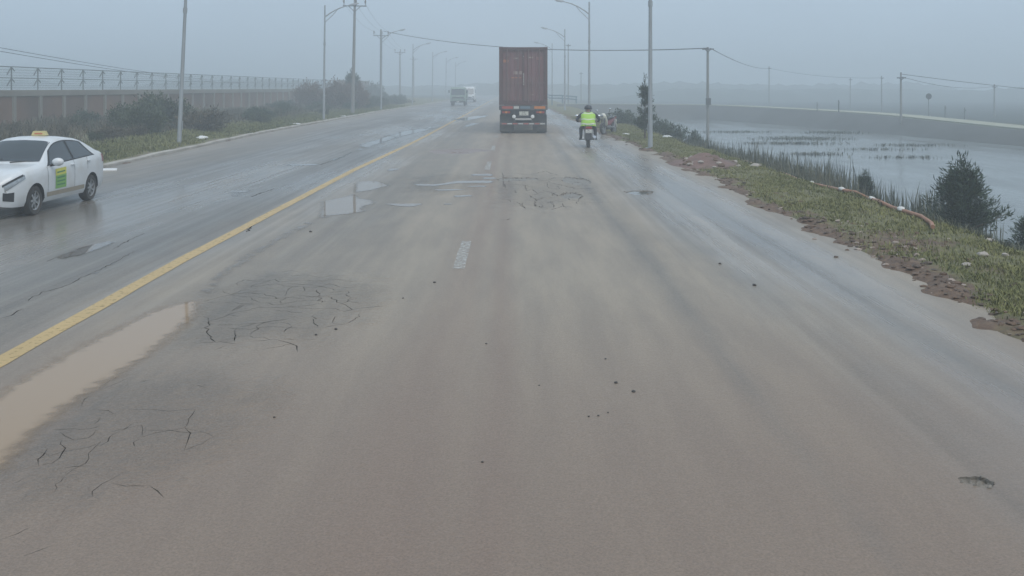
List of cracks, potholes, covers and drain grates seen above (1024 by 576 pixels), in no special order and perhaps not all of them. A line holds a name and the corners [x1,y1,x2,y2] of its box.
crack [204,270,382,352]
crack [502,171,590,209]
crack [6,373,212,556]
pothole [958,475,995,488]
